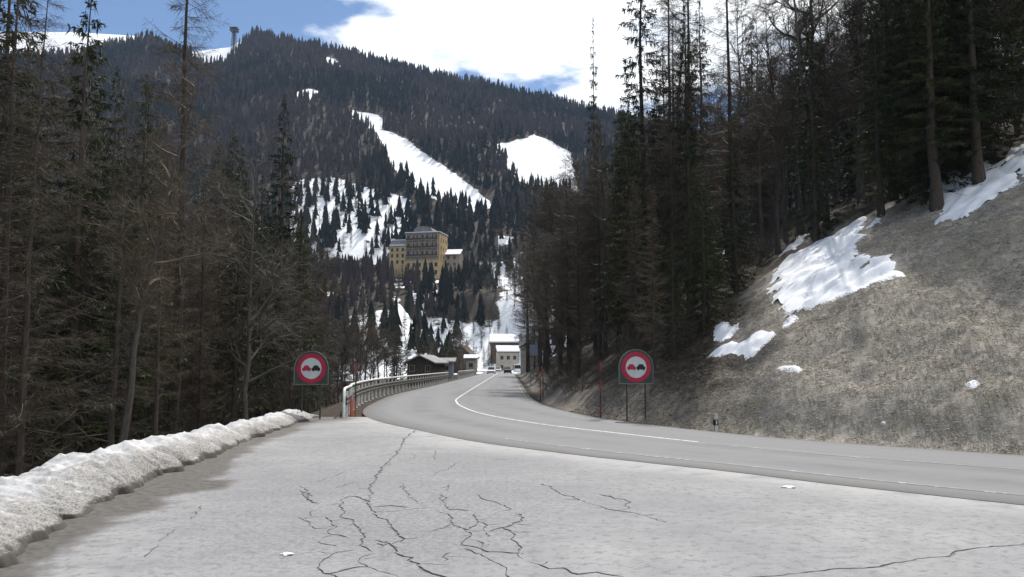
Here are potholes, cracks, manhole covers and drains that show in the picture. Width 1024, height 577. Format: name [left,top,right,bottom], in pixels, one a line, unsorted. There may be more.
crack [297,430,624,577]
crack [759,544,1023,577]
crack [541,484,665,522]
